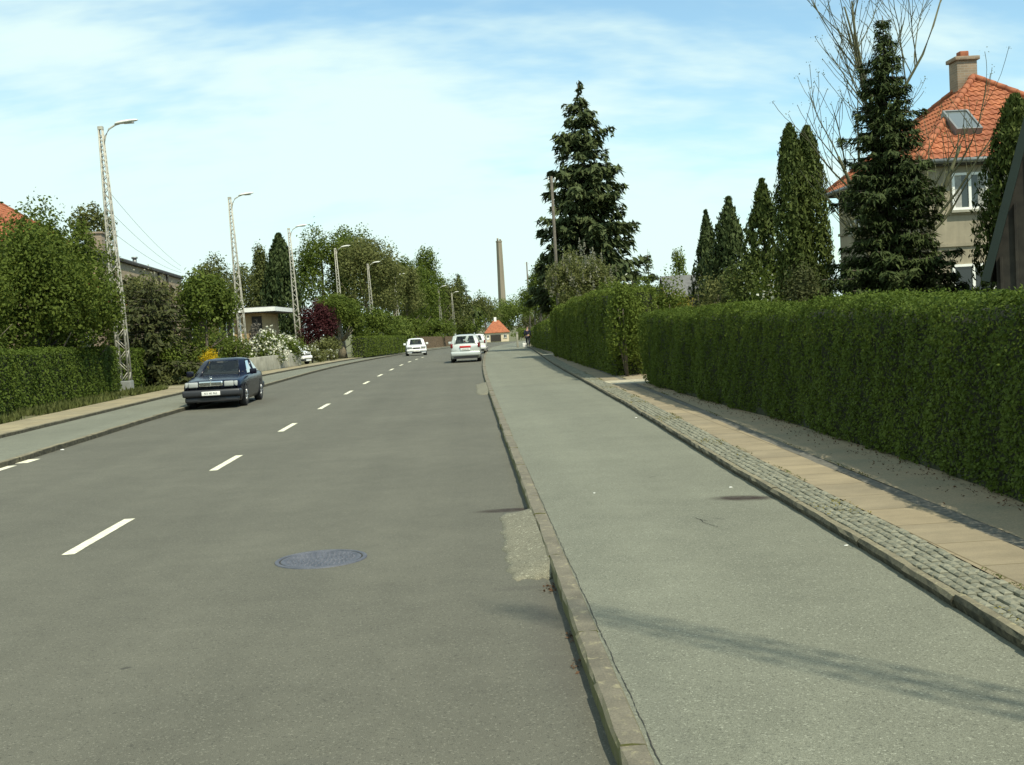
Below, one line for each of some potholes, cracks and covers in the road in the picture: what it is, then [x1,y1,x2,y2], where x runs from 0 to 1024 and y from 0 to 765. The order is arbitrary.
manhole cover [275,549,367,569]
